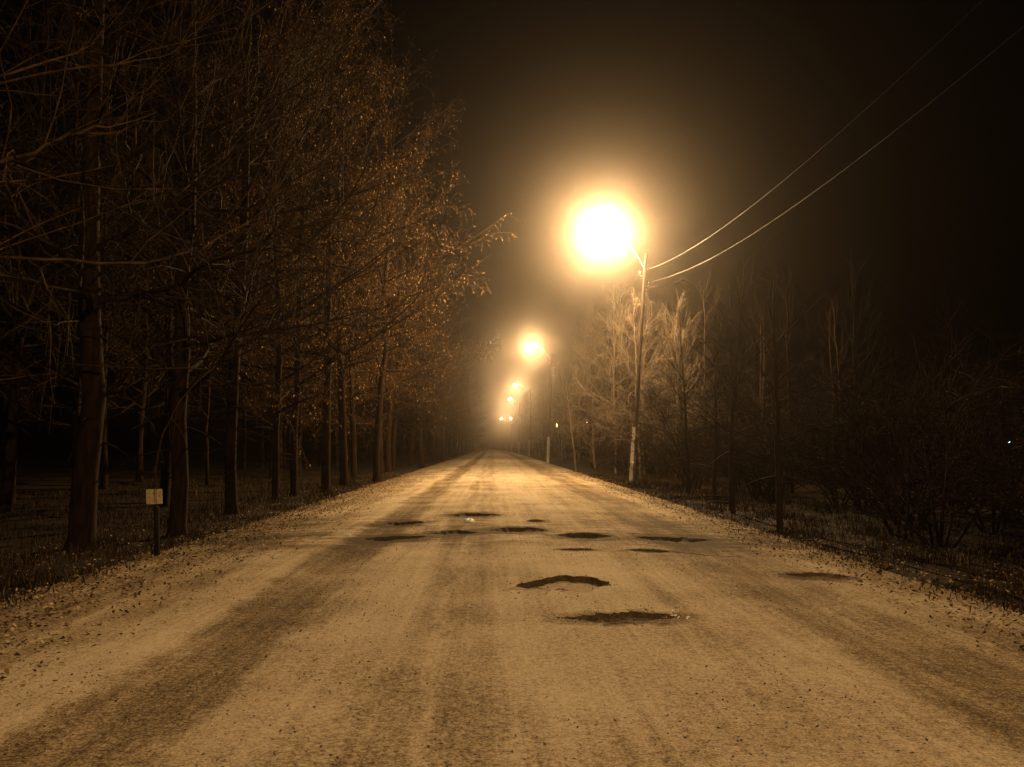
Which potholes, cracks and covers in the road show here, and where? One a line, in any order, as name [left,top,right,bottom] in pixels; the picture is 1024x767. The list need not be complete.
pothole [498,573,617,597]
pothole [554,609,681,626]
pothole [636,536,713,544]
